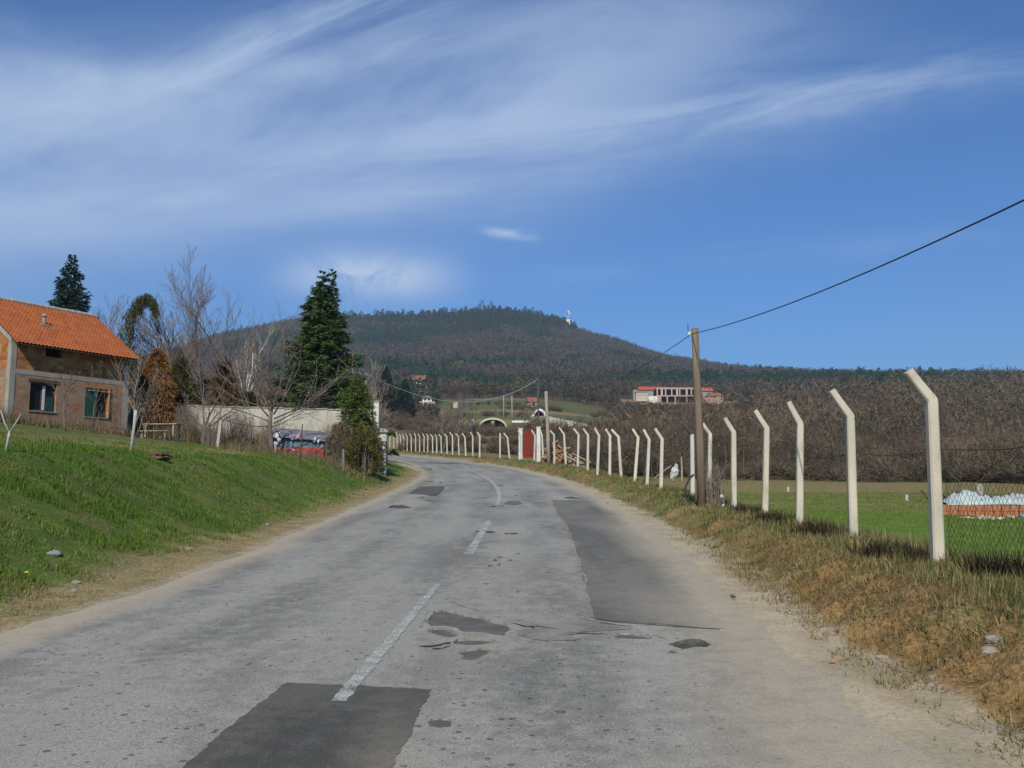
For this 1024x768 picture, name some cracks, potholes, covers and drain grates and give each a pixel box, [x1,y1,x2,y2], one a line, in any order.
pothole [670,639,711,649]
pothole [458,647,490,660]
pothole [427,717,452,728]
pothole [423,609,511,635]
pothole [427,627,458,637]
pothole [453,637,497,645]
